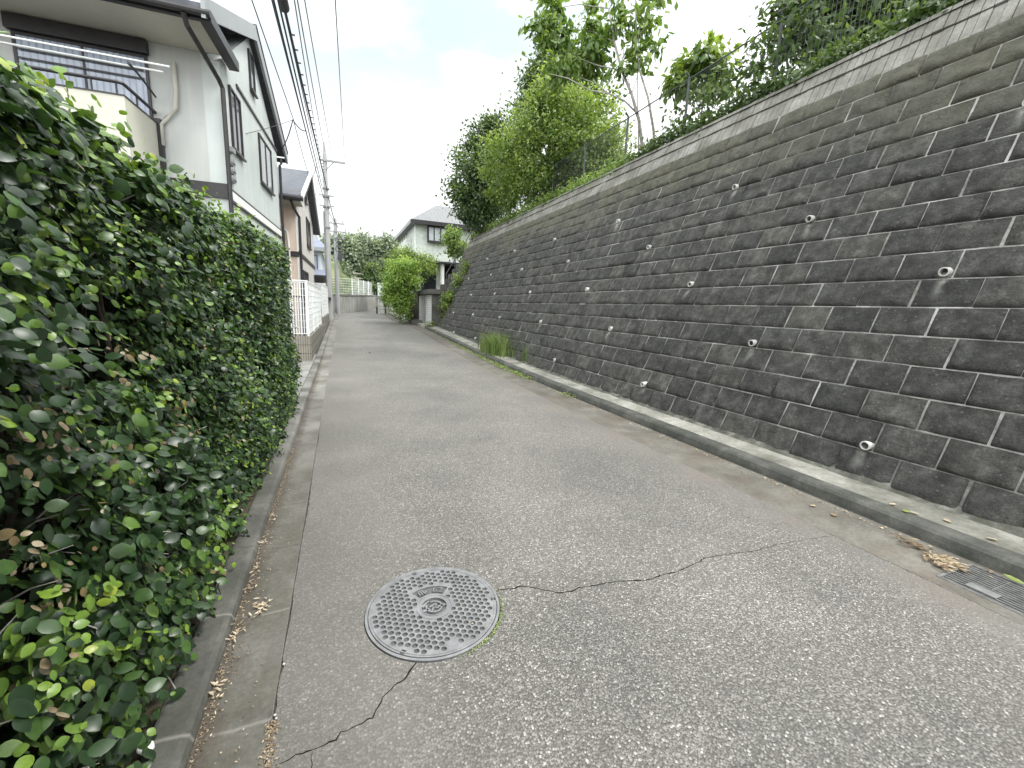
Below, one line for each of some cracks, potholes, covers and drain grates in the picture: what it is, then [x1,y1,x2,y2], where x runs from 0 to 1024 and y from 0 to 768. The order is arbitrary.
crack [496,540,800,593]
manhole cover [365,567,500,669]
crack [264,422,416,768]
drain grate [936,563,1024,618]
